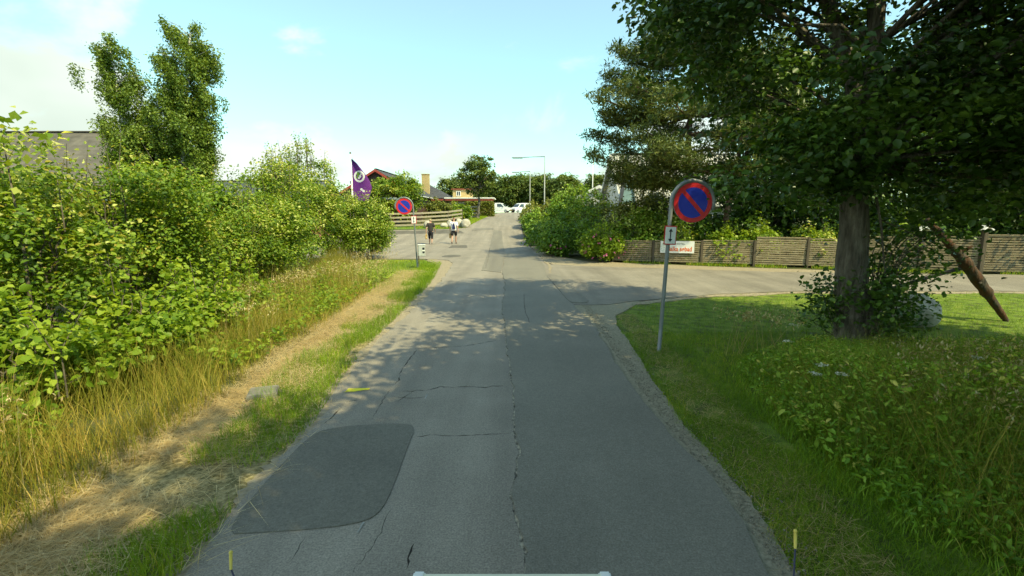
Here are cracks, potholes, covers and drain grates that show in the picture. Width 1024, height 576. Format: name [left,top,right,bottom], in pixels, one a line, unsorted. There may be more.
crack [373,279,528,574]
